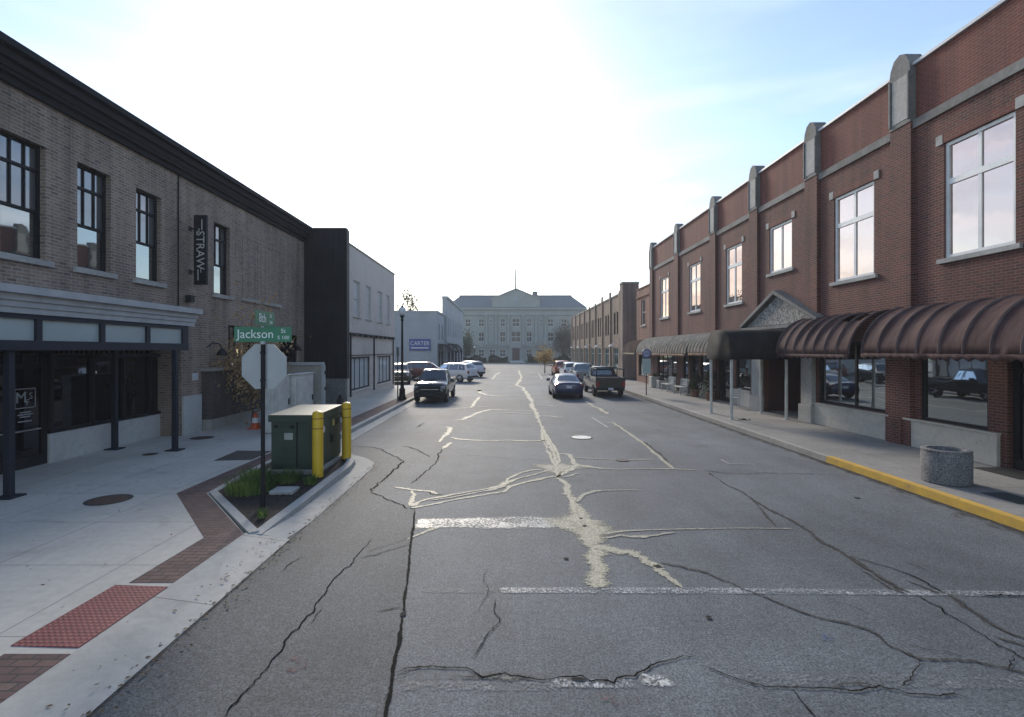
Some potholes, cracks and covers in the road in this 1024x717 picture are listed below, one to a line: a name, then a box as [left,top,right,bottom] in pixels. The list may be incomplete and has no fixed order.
crack [395,578,691,683]
crack [662,470,1024,716]
manhole cover [83,494,134,506]
crack [224,537,410,717]
